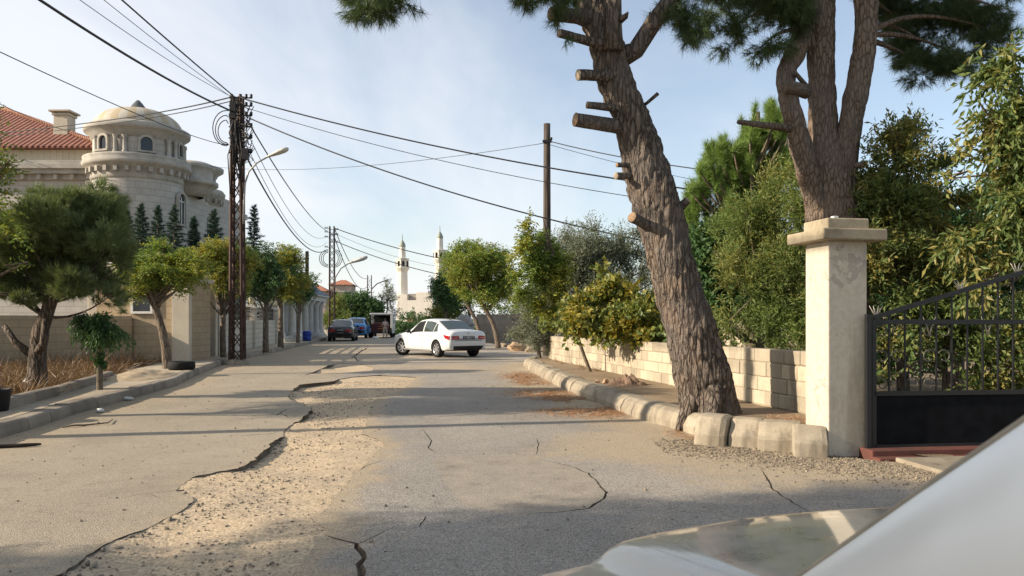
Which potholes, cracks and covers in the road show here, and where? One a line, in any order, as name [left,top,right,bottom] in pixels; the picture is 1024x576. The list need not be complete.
pothole [56,375,416,576]
crack [362,410,543,469]
crack [760,468,809,512]
crack [510,440,608,514]
crack [326,523,402,576]
